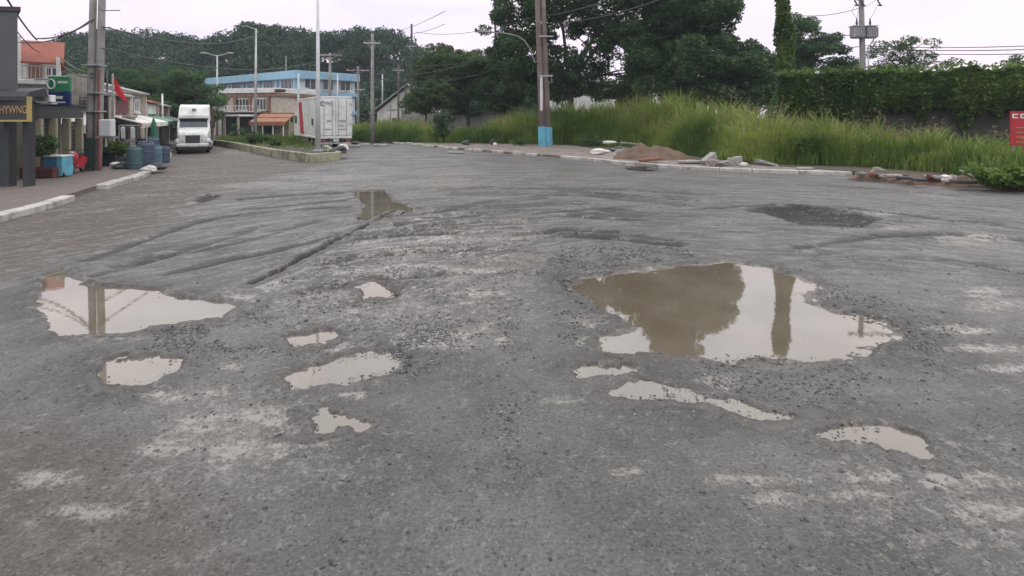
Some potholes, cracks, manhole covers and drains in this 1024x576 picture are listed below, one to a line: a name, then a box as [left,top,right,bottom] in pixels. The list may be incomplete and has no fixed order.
pothole [736,202,899,230]
pothole [270,338,430,396]
pothole [282,402,393,444]
pothole [561,355,648,384]
crack [236,209,405,288]
pothole [271,324,354,353]
pothole [551,257,929,373]
pothole [80,348,197,396]
pothole [339,188,438,224]
pothole [24,266,253,340]
pothole [796,409,963,480]
pothole [344,280,408,304]
